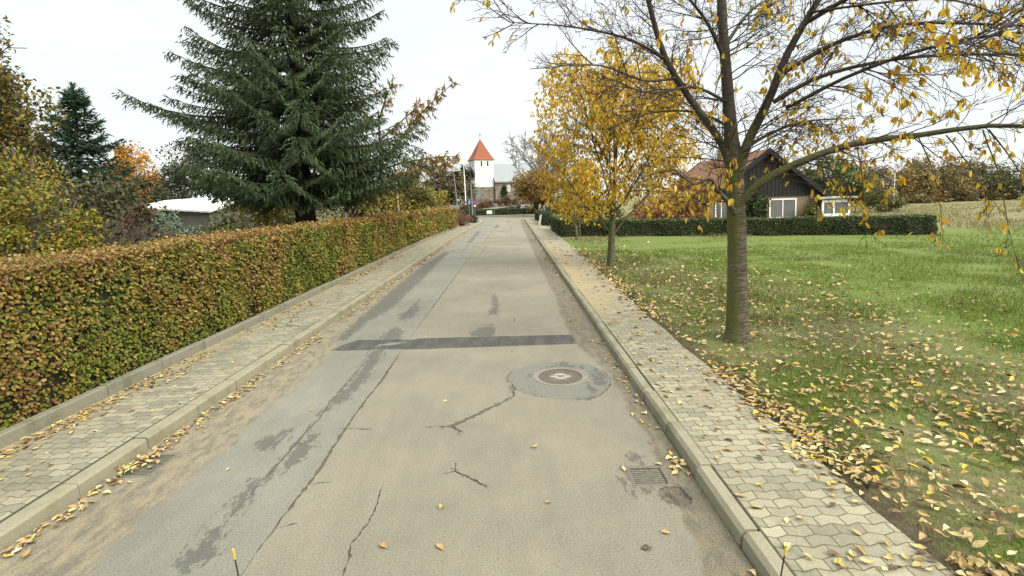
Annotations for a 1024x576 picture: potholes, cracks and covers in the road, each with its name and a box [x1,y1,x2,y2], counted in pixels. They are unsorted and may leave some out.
crack [443,463,485,486]
drain grate [624,465,674,487]
crack [229,350,402,576]
manhole cover [533,367,588,386]
crack [427,371,547,432]
